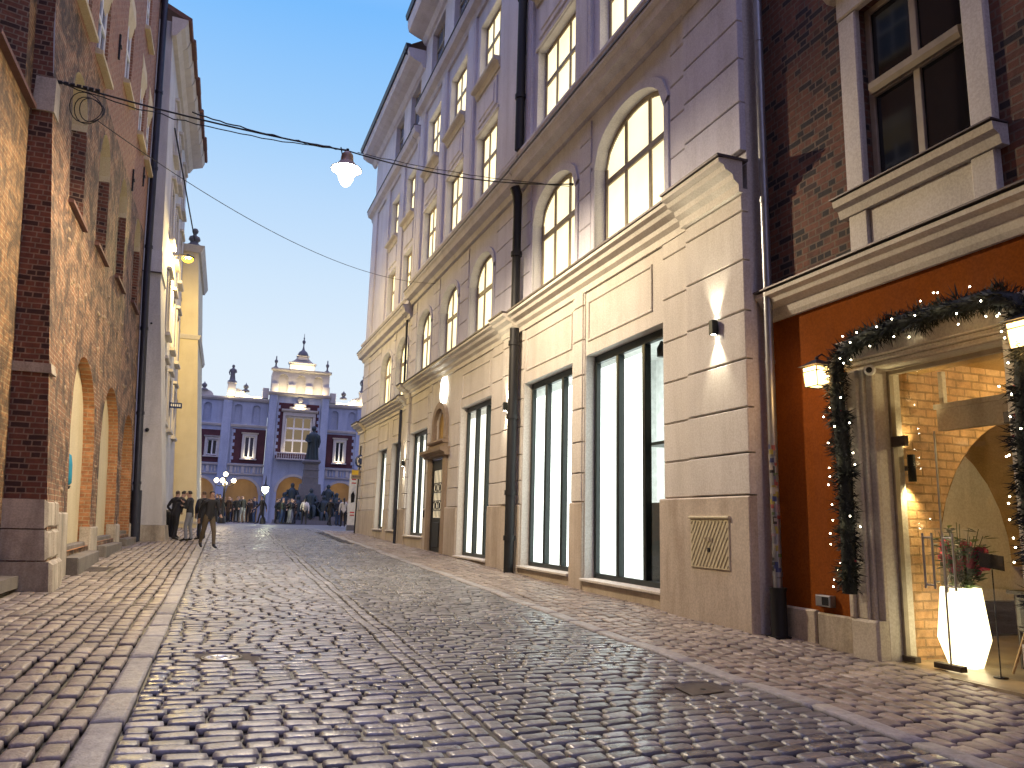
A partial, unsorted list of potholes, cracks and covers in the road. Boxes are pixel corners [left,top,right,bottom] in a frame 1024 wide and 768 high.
manhole cover [185,652,259,667]
manhole cover [646,681,752,703]
